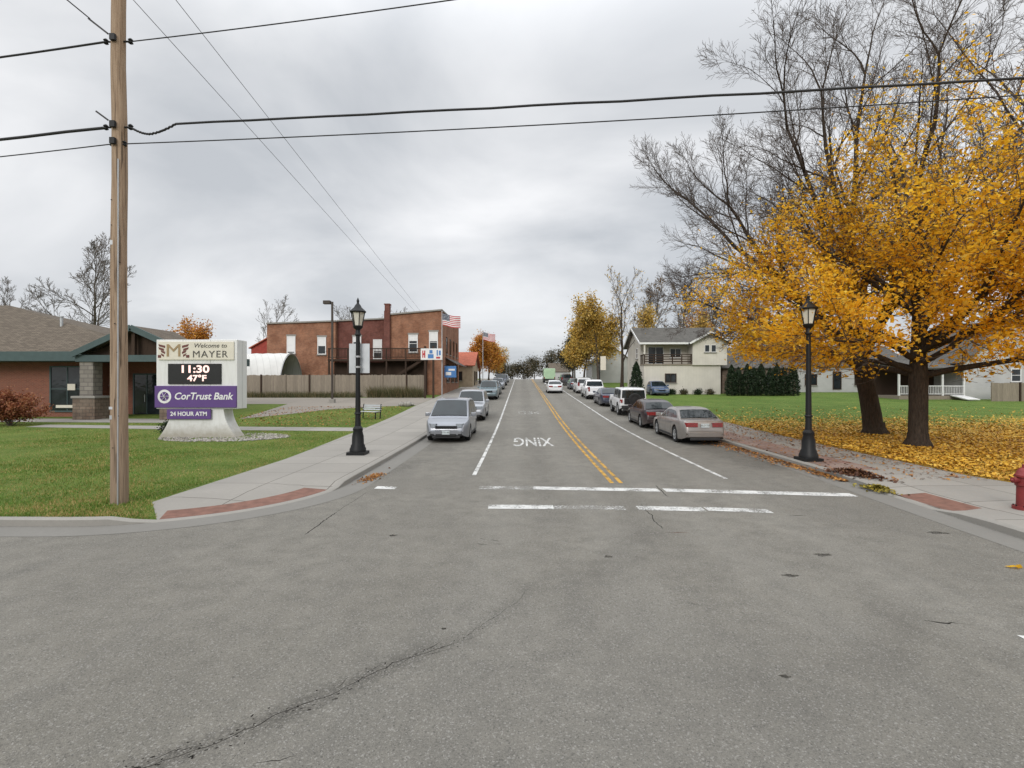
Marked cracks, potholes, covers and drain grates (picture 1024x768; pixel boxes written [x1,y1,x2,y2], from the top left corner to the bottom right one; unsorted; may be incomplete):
crack [124,599,520,768]
